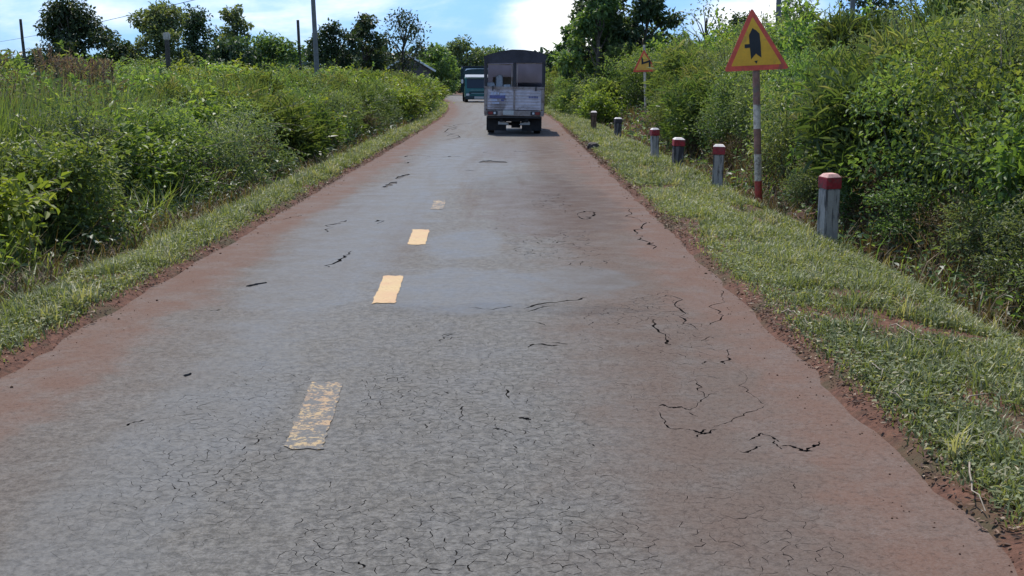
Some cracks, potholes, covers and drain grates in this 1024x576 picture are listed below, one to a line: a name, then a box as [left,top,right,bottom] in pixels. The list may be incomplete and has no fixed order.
crack [469,290,863,576]
crack [273,314,662,575]
crack [43,356,311,576]
crack [485,194,609,267]
crack [626,209,657,249]
